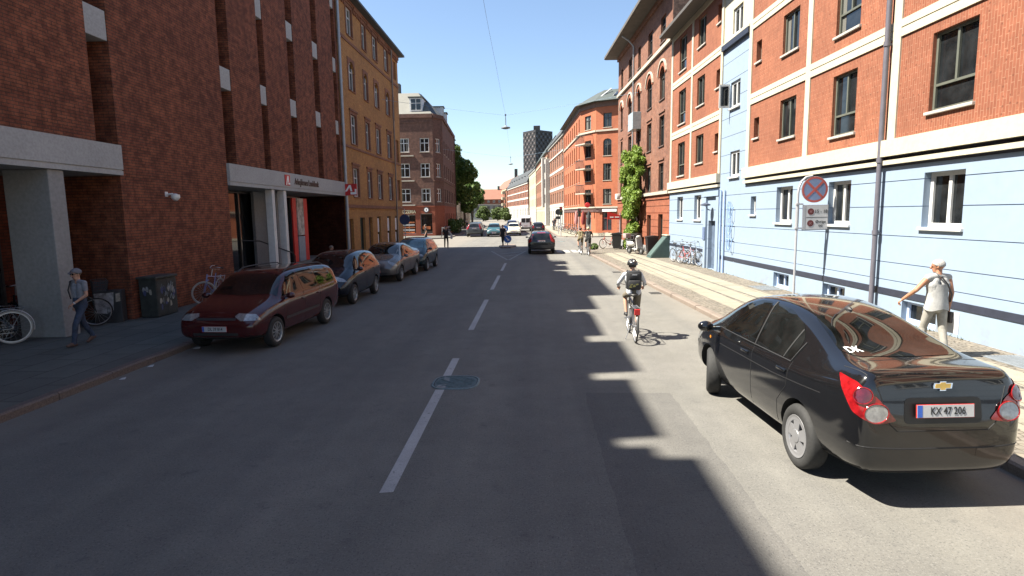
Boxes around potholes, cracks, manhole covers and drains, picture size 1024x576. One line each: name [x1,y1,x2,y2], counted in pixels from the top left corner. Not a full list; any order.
manhole cover [431,375,480,390]
